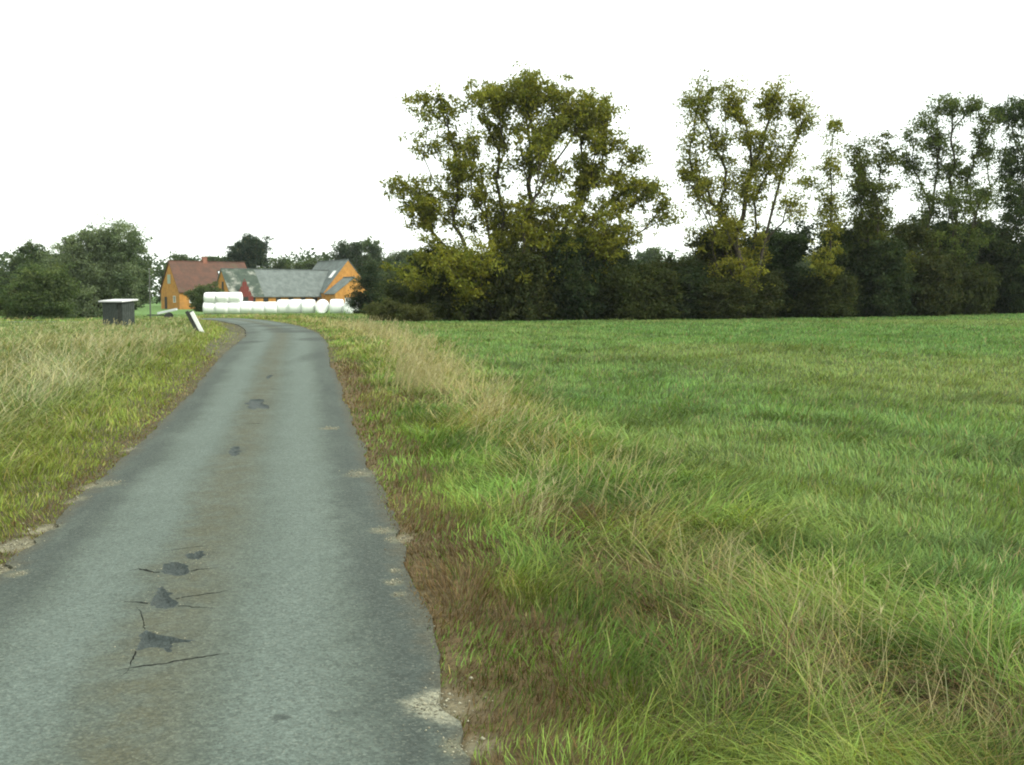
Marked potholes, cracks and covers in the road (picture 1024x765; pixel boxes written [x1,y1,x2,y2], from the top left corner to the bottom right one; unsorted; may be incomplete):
pothole [244,399,270,410]
pothole [161,562,190,576]
pothole [185,551,205,560]
pothole [136,630,193,652]
crack [175,591,224,608]
pothole [150,586,178,609]
crack [120,651,228,676]
